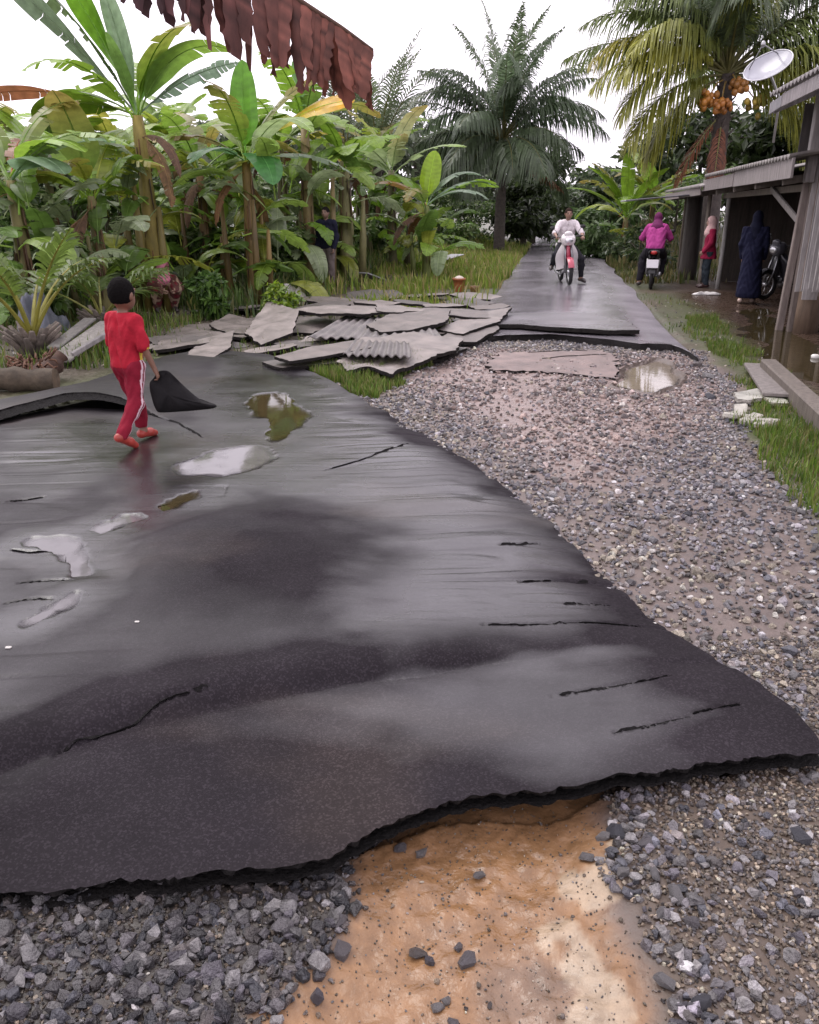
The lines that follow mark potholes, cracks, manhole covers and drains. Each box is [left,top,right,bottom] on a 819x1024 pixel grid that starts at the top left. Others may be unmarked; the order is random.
pothole [608,357,688,396]
crack [482,602,638,627]
crack [147,411,201,437]
crack [615,703,740,733]
crack [64,684,208,752]
crack [331,443,409,469]
crack [560,675,668,696]
